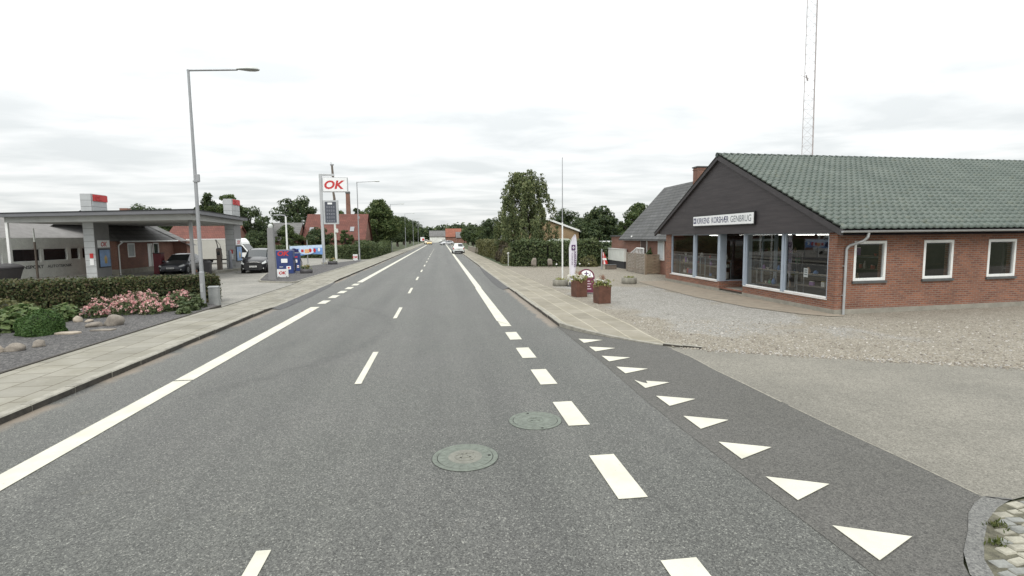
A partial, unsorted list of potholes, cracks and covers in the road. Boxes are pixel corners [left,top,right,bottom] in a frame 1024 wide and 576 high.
manhole cover [432,444,499,472]
manhole cover [509,412,562,430]
